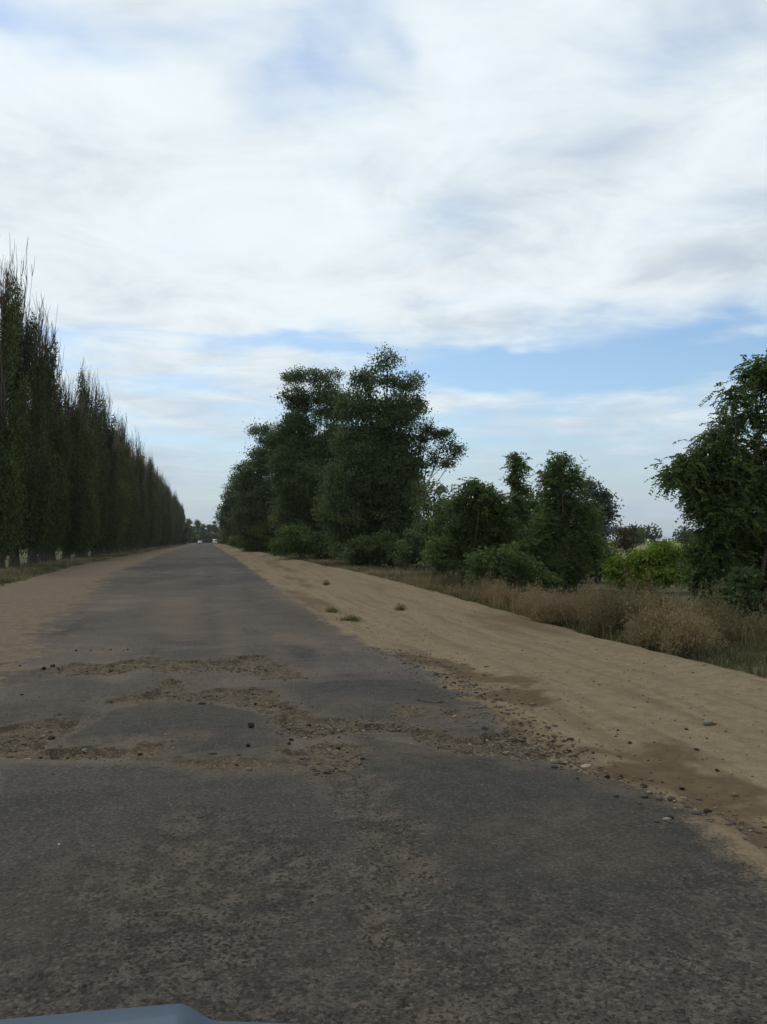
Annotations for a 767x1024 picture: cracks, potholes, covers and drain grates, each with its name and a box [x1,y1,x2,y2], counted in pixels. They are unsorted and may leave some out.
pothole [0,717,171,761]
pothole [55,657,205,676]
pothole [391,705,434,717]
pothole [169,742,362,773]
pothole [274,705,412,740]
pothole [103,678,290,719]
pothole [201,655,303,680]
